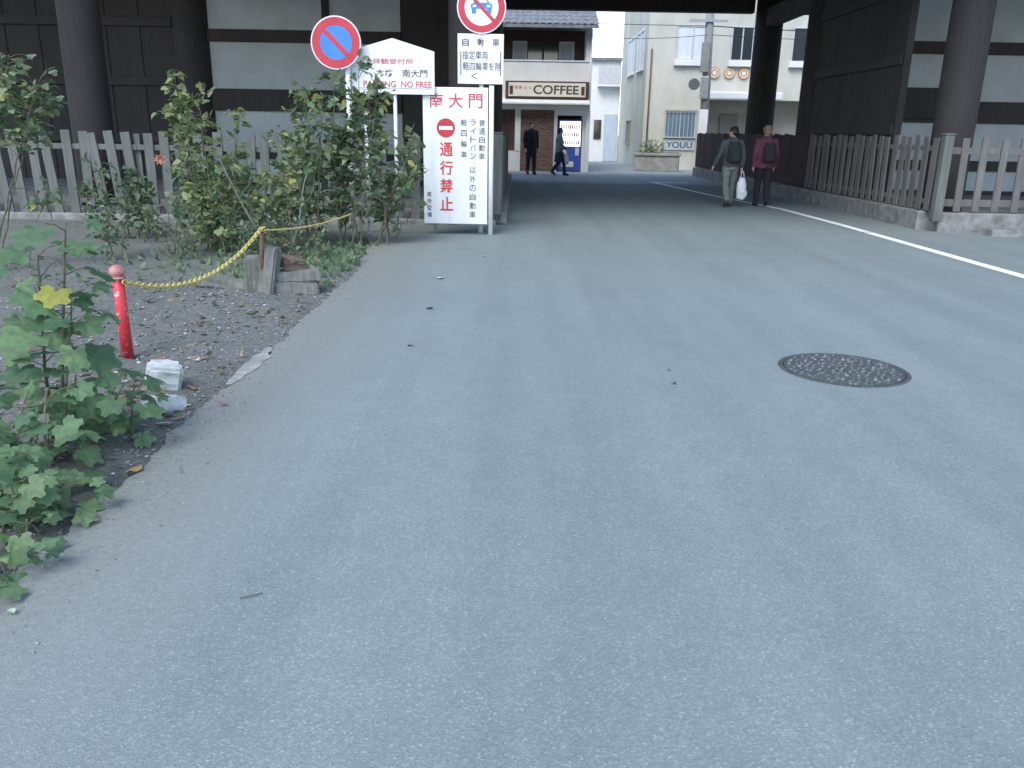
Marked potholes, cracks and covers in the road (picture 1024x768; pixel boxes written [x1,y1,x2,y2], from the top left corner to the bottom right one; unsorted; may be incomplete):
manhole cover [778,353,912,388]
